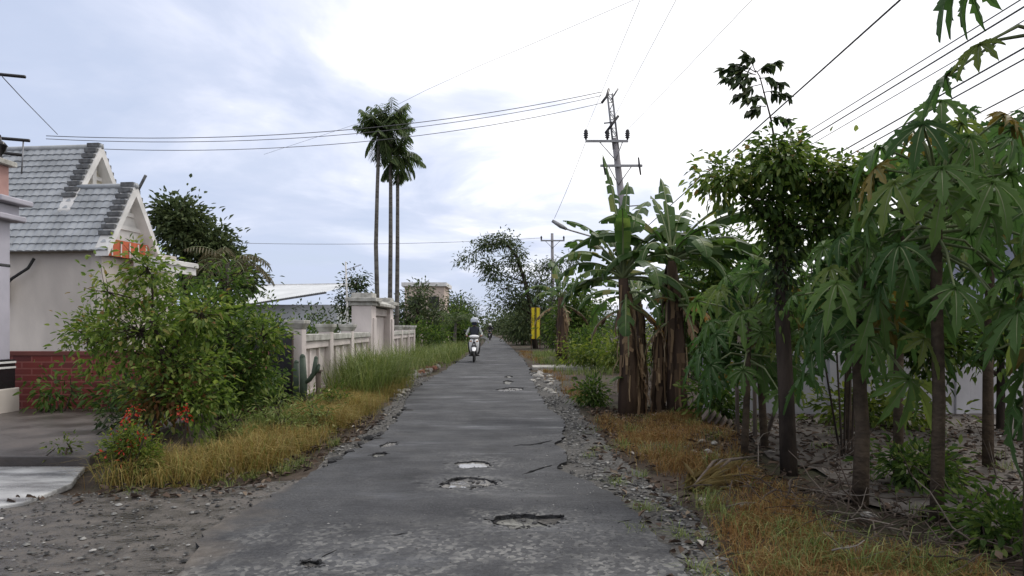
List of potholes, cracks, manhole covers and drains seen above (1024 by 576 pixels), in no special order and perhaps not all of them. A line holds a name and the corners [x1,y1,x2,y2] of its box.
pothole [296,558,326,569]
pothole [437,476,503,490]
pothole [454,460,494,468]
pothole [484,512,567,530]
